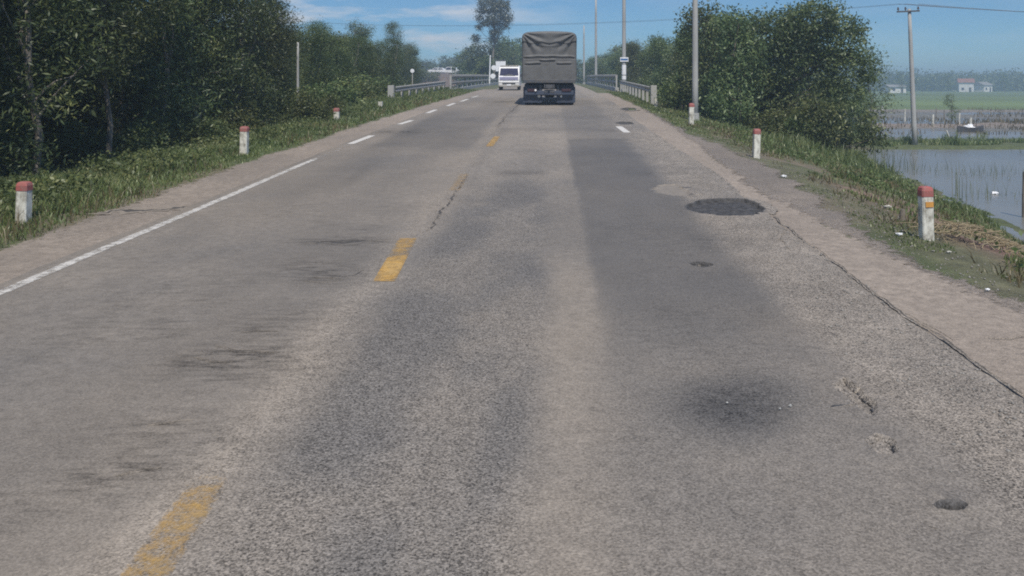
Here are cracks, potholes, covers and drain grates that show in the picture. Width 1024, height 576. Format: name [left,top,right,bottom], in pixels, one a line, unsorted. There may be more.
crack [89,206,189,215]
